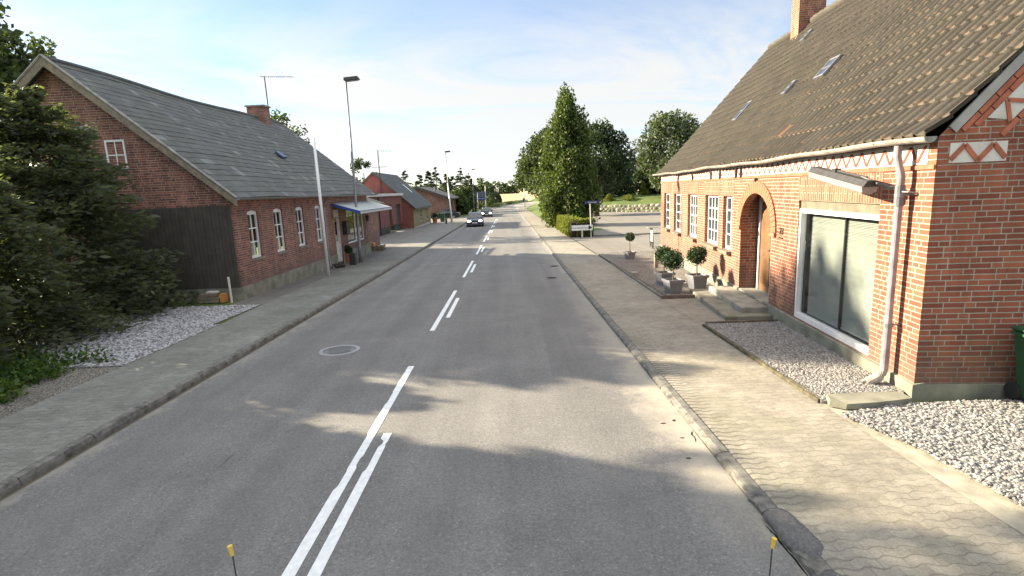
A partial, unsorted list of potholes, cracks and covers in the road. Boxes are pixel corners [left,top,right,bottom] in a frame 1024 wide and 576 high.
manhole cover [318,345,360,356]
